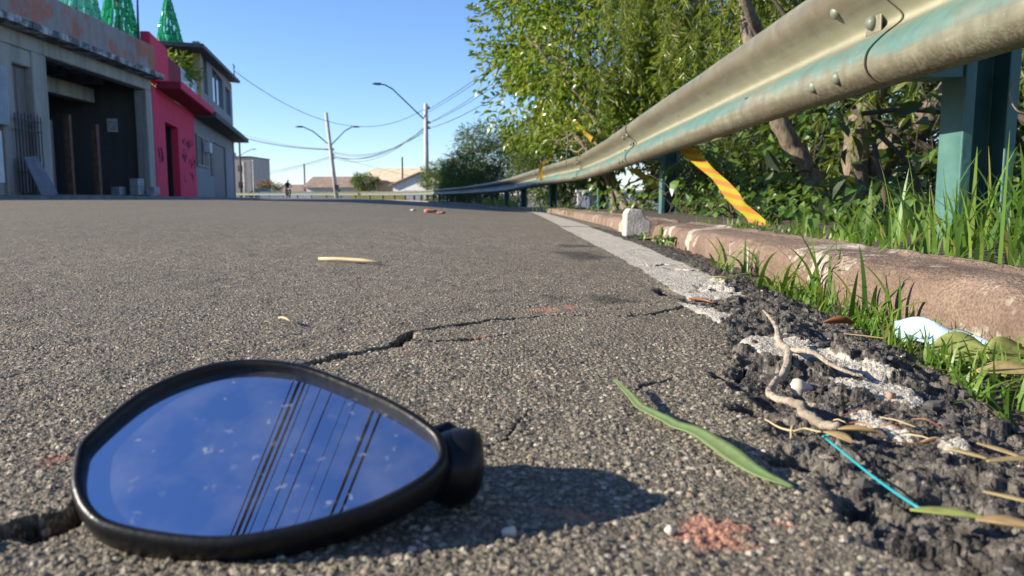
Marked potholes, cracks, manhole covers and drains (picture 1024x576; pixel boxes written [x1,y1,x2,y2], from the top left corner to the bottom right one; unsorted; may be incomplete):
pothole [825,498,925,530]
pothole [759,451,835,476]
pothole [819,361,878,377]
pothole [723,401,782,421]
crack [0,305,688,556]
pothole [707,371,734,382]
